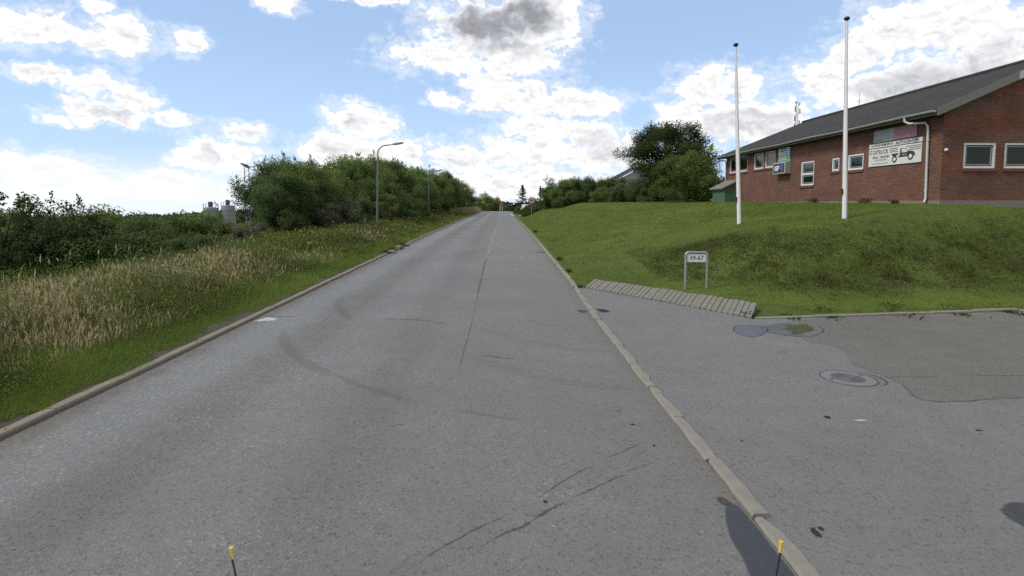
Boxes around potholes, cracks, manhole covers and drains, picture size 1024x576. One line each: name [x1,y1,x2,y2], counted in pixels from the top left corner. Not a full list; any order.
manhole cover [819,370,879,387]
